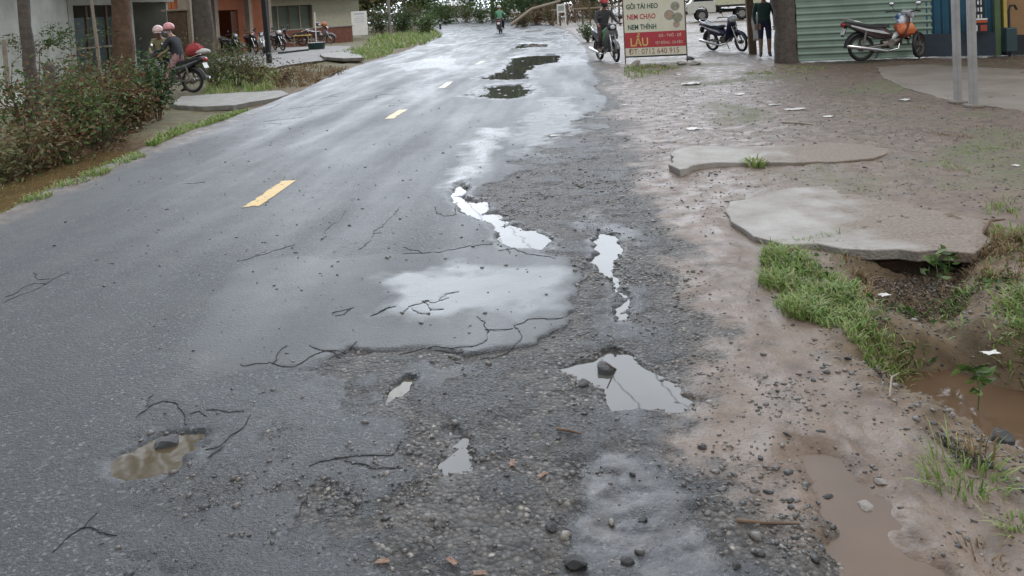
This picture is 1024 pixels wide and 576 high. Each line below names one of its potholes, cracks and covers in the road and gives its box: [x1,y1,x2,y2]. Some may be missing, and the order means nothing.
crack [135,395,251,458]
crack [52,513,117,553]
crack [332,291,459,317]
crack [399,317,564,359]
crack [404,244,556,259]
pothole [559,346,712,415]
pothole [586,232,638,322]
pothole [458,82,543,99]
crack [5,272,69,302]
pothole [104,426,216,482]
pothole [435,426,486,481]
pothole [376,372,423,406]
